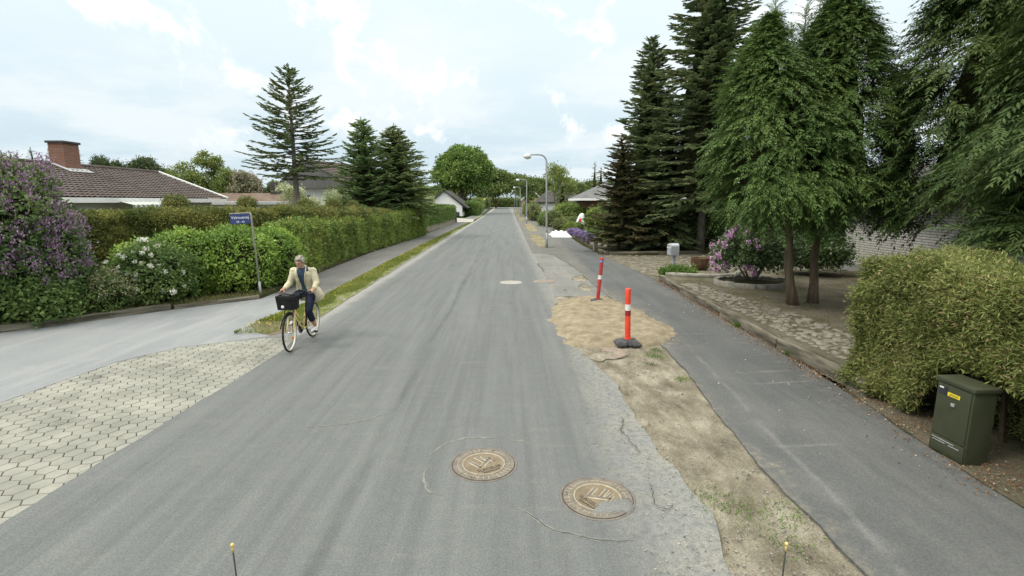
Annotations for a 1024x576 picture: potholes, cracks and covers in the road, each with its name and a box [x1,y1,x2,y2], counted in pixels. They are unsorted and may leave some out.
crack [619,417,639,452]
crack [422,437,529,495]
manhole cover [560,477,636,521]
manhole cover [595,347,628,358]
manhole cover [450,448,517,482]
crack [308,414,385,428]
crack [511,481,673,542]
